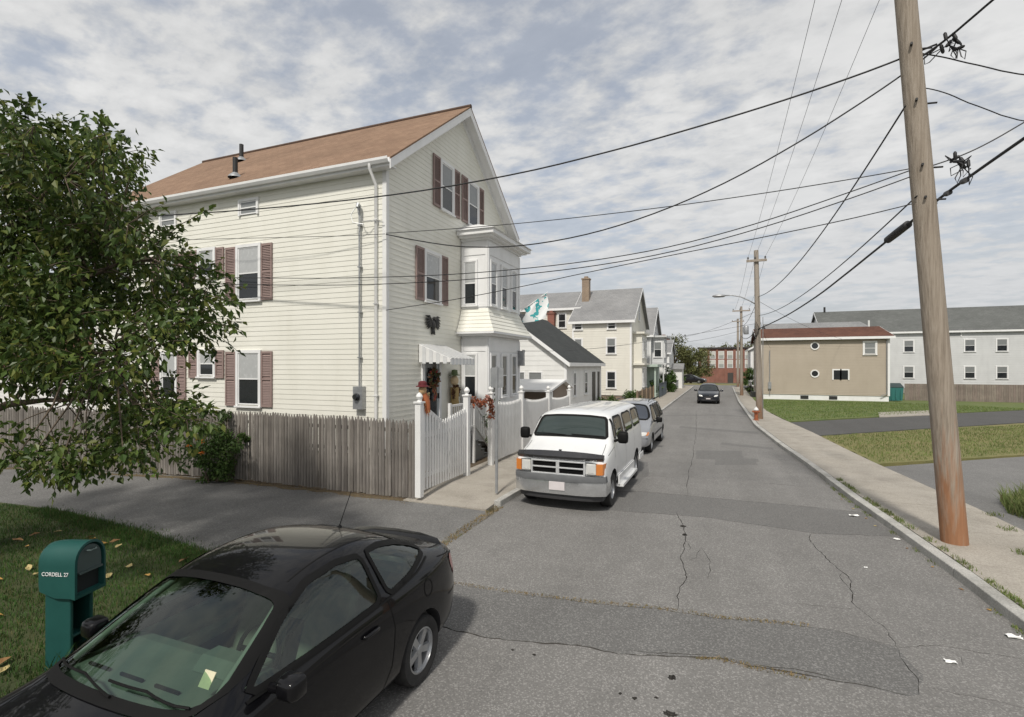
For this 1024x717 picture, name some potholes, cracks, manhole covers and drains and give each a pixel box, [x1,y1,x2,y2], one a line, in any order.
crack [799,536,1023,708]
crack [677,515,711,607]
